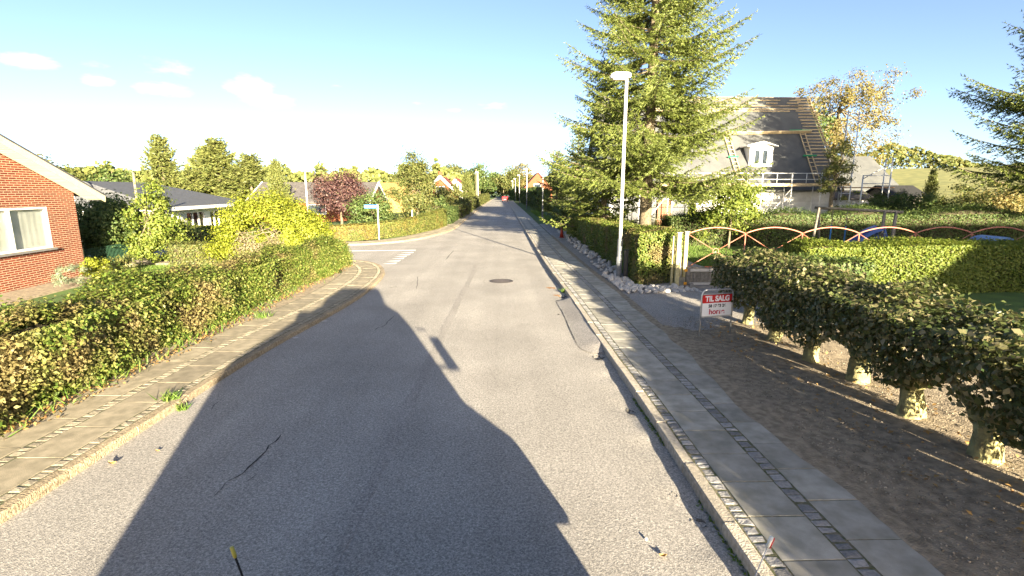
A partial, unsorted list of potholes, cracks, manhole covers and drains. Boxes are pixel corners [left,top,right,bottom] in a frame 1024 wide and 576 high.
crack [214,435,281,496]
